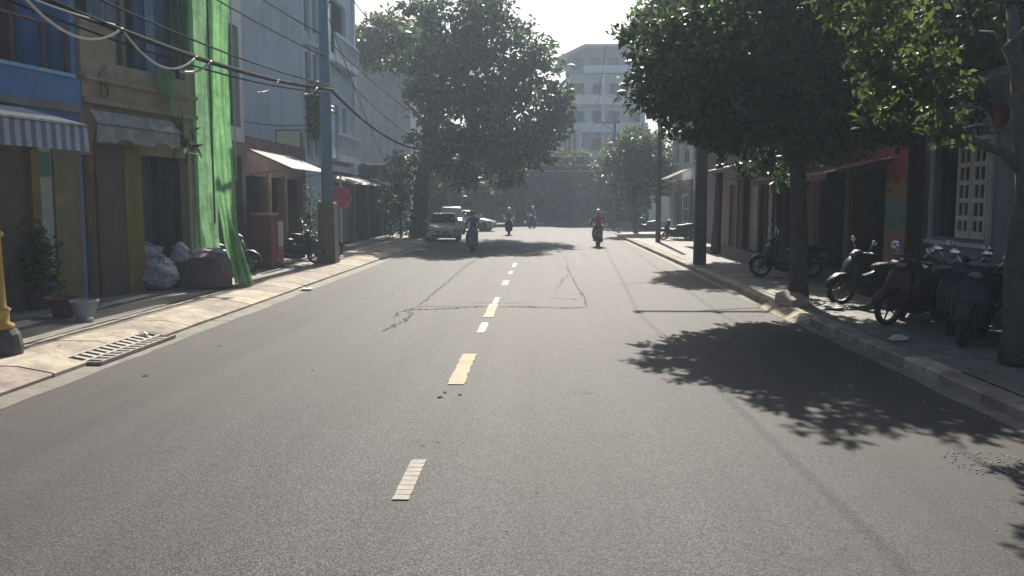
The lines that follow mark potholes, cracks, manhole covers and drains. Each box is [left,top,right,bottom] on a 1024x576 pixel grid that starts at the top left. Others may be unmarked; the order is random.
drain grate [65,332,176,365]
crack [383,257,587,331]
